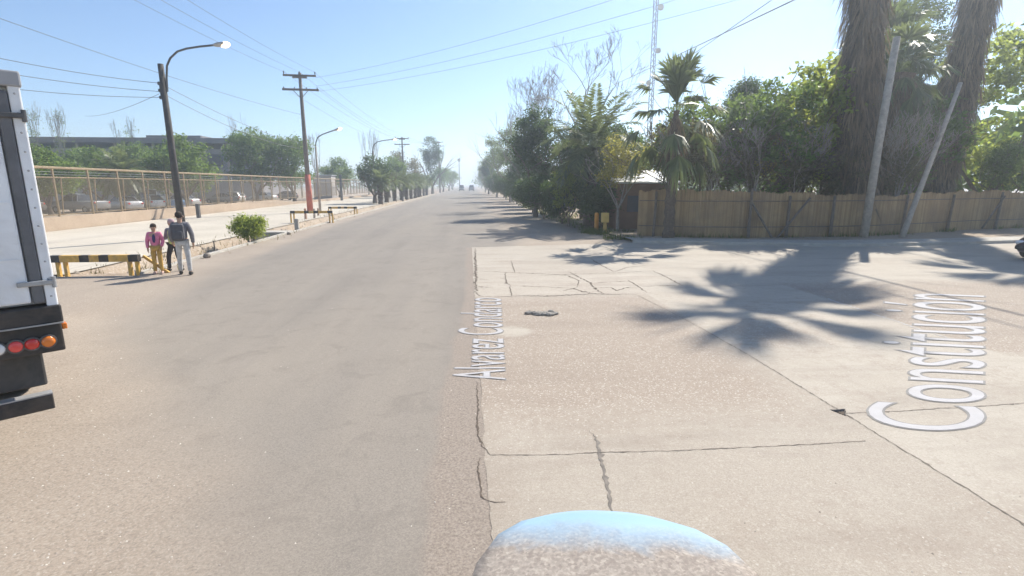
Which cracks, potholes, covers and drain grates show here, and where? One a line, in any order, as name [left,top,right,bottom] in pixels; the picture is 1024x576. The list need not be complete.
crack [476,388,505,502]
crack [589,431,613,511]
crack [473,249,681,297]
